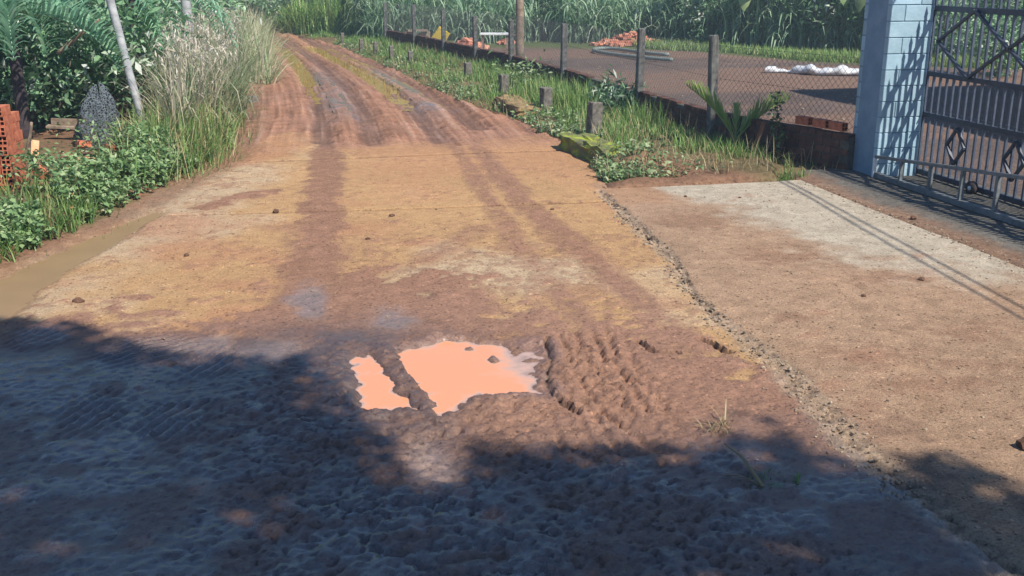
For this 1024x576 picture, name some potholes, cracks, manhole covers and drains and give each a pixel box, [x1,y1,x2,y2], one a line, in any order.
pothole [340,332,559,416]
